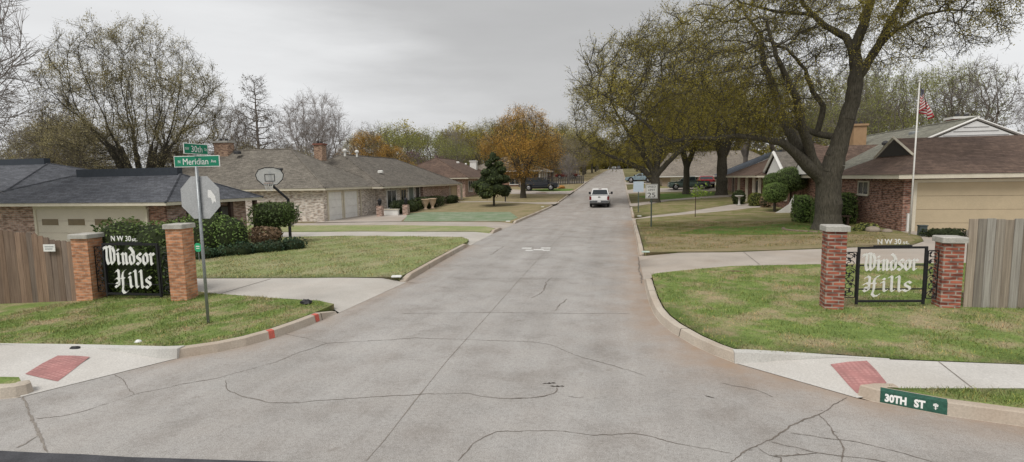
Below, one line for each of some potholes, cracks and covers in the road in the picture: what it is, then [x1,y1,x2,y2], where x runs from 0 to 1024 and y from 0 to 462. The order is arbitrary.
crack [461,430,728,457]
crack [731,397,932,462]
crack [36,334,639,419]
